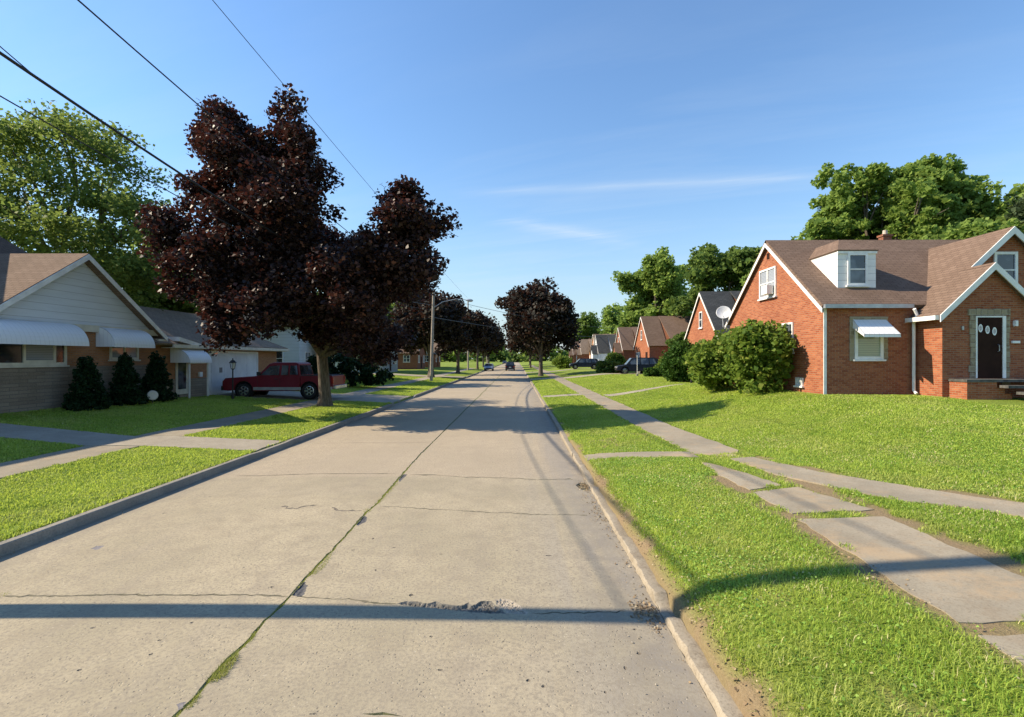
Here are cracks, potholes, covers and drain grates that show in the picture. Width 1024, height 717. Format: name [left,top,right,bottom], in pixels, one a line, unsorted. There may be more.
crack [5,593,395,604]
crack [383,506,586,516]
pothole [397,601,506,614]
